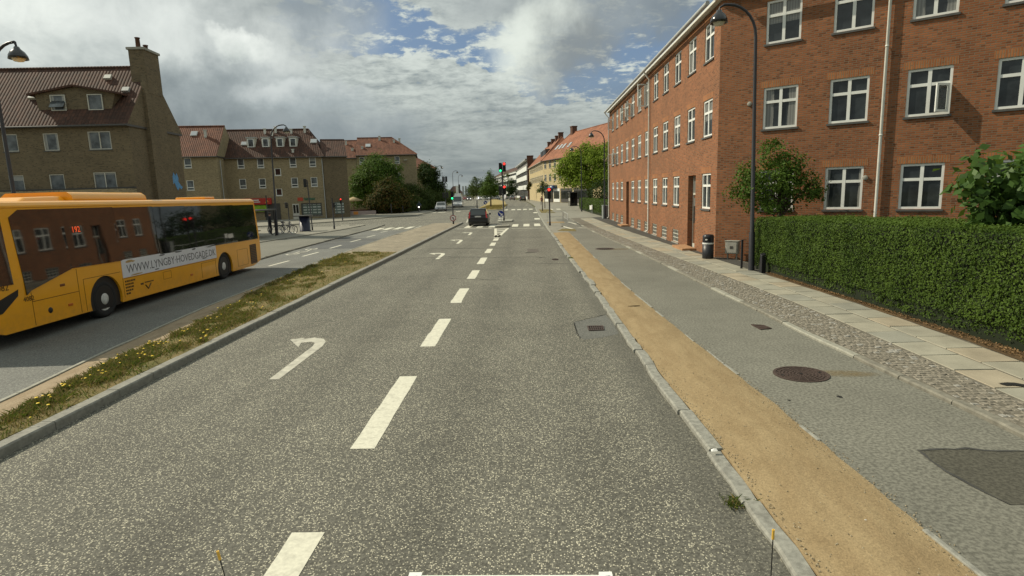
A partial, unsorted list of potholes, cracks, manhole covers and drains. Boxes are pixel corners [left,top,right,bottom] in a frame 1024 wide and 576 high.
manhole cover [773,366,830,383]
